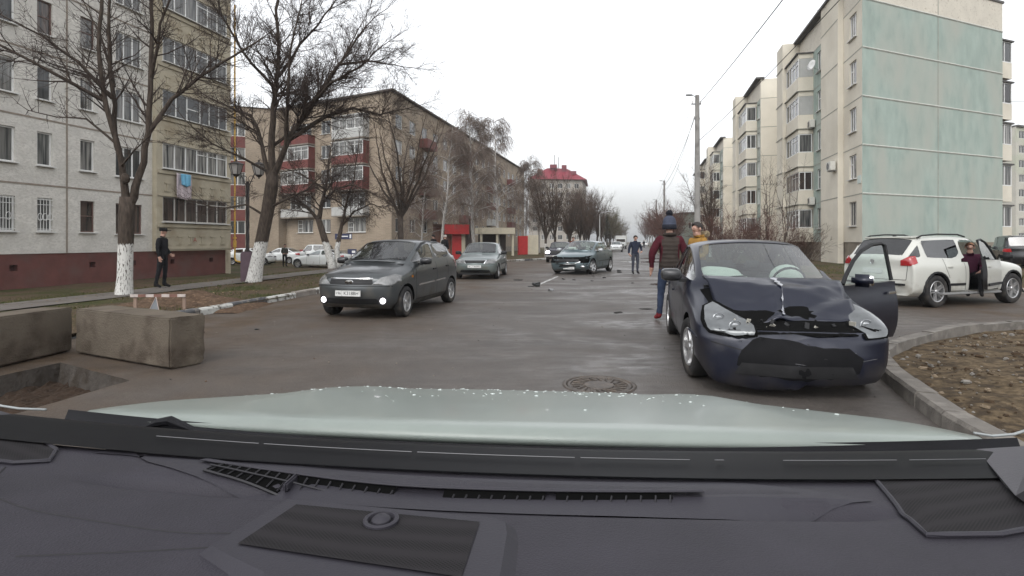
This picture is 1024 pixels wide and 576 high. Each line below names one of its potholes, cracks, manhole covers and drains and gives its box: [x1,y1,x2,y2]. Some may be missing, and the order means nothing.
manhole cover [562,375,637,393]
pothole [0,363,130,414]
